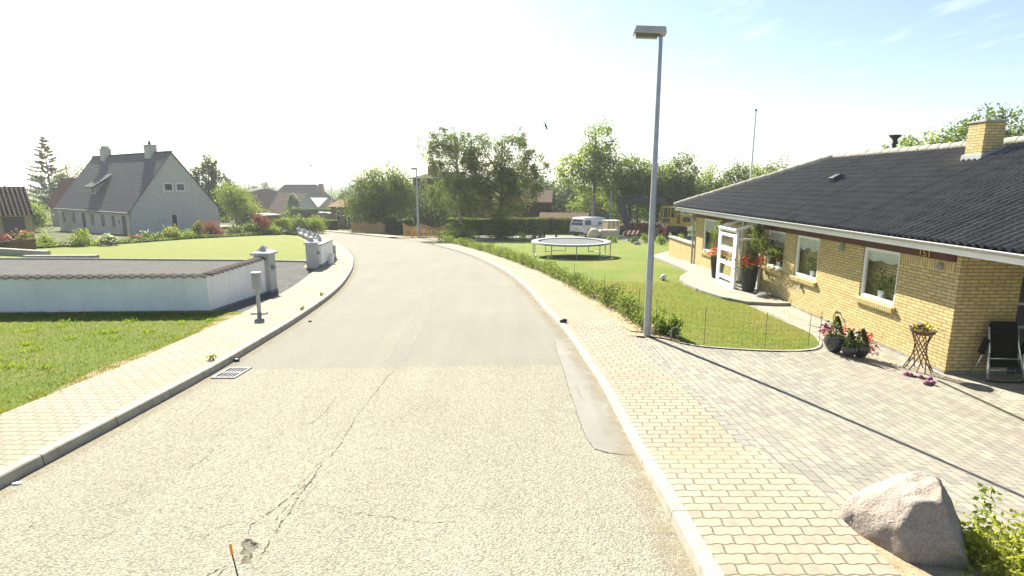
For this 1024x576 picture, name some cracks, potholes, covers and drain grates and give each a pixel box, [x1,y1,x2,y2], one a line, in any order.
drain grate [211,367,252,378]
crack [205,376,388,576]
